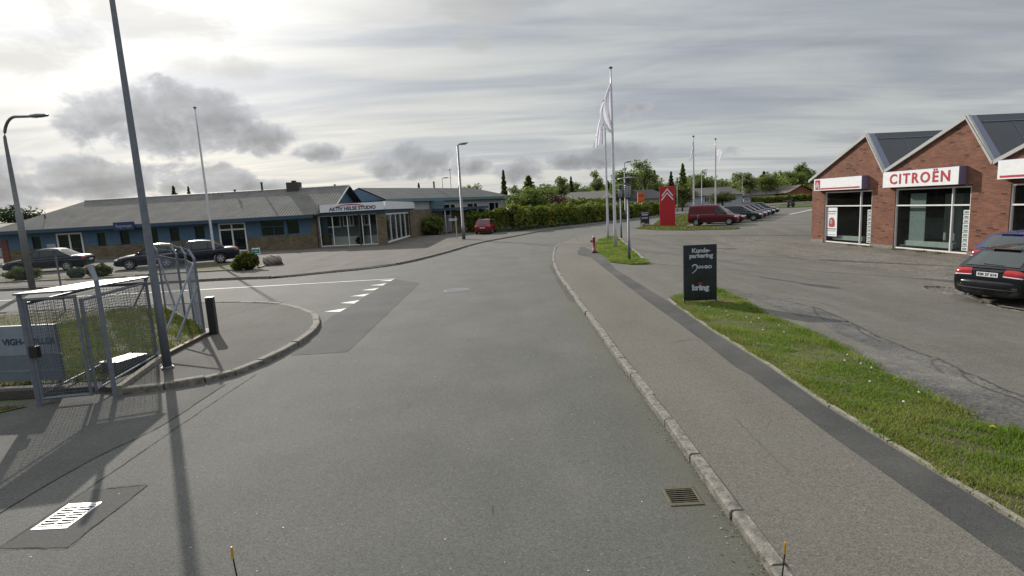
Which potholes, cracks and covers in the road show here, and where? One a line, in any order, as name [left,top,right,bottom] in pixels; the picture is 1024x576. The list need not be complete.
pothole [920,286,963,295]
crack [740,291,1024,402]
drain grate [30,502,102,531]
drain grate [661,486,704,506]
